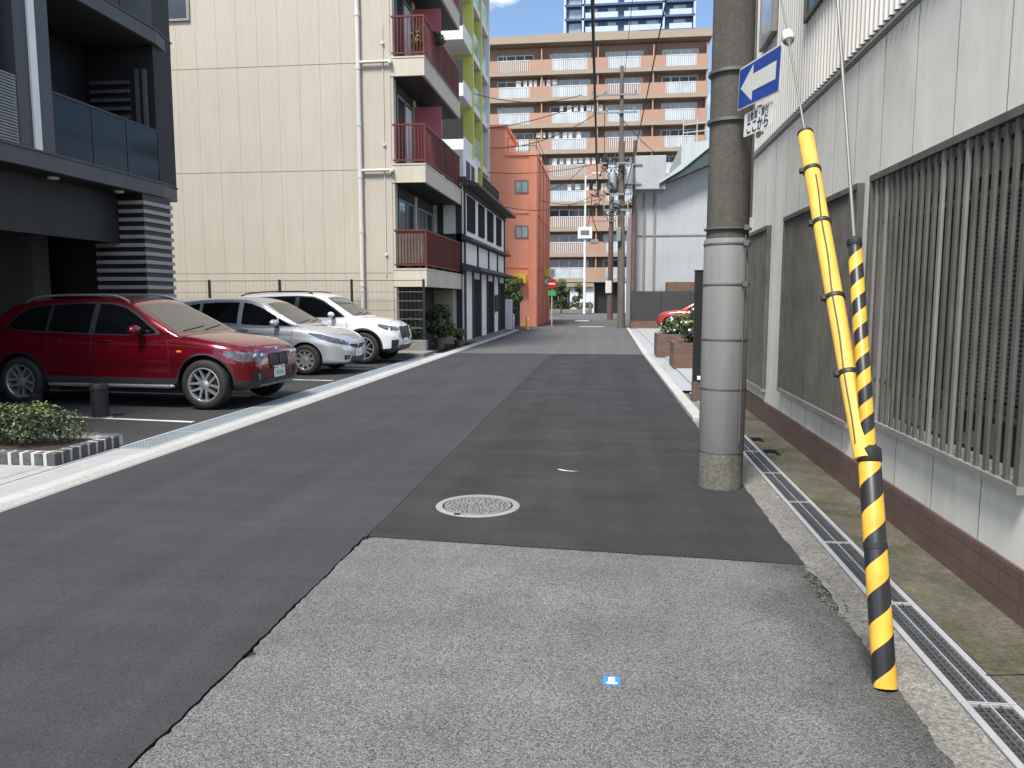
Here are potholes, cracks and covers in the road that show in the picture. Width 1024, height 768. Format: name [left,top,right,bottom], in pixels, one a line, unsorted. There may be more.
drain grate [819,541,915,603]
drain grate [253,398,304,407]
drain grate [217,407,277,418]
pothole [803,566,849,619]
manhole cover [436,495,520,517]
drain grate [759,472,812,502]
drain grate [892,603,1017,705]
drain grate [959,701,1024,768]
drain grate [119,431,203,449]
drain grate [173,418,243,432]
drain grate [744,435,761,451]
drain grate [283,390,328,398]
